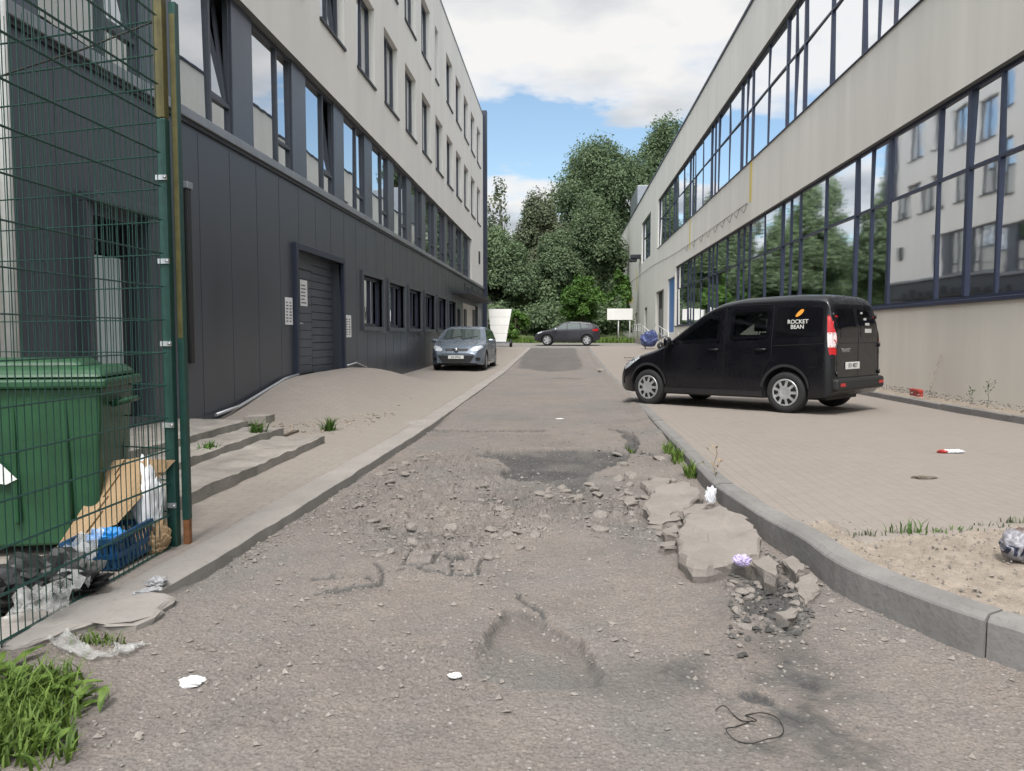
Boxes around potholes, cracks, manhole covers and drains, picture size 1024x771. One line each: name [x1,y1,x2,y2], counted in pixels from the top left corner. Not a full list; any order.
pothole [473,491,528,506]
crack [608,428,658,456]
pothole [733,577,809,636]
crack [515,592,547,621]
crack [310,544,484,596]
